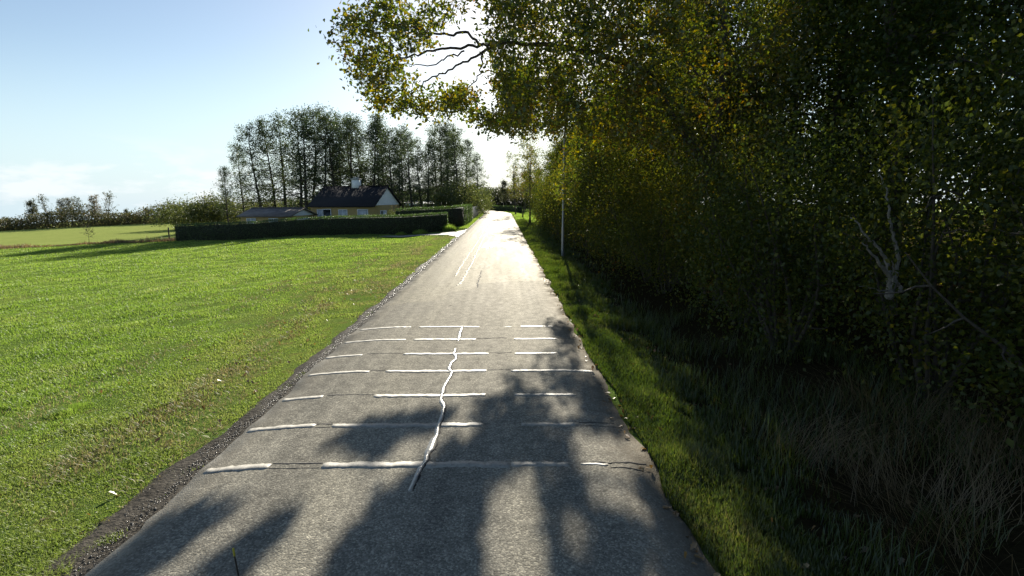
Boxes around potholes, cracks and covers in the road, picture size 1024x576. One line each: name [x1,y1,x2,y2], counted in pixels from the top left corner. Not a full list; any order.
crack [408,326,511,491]
